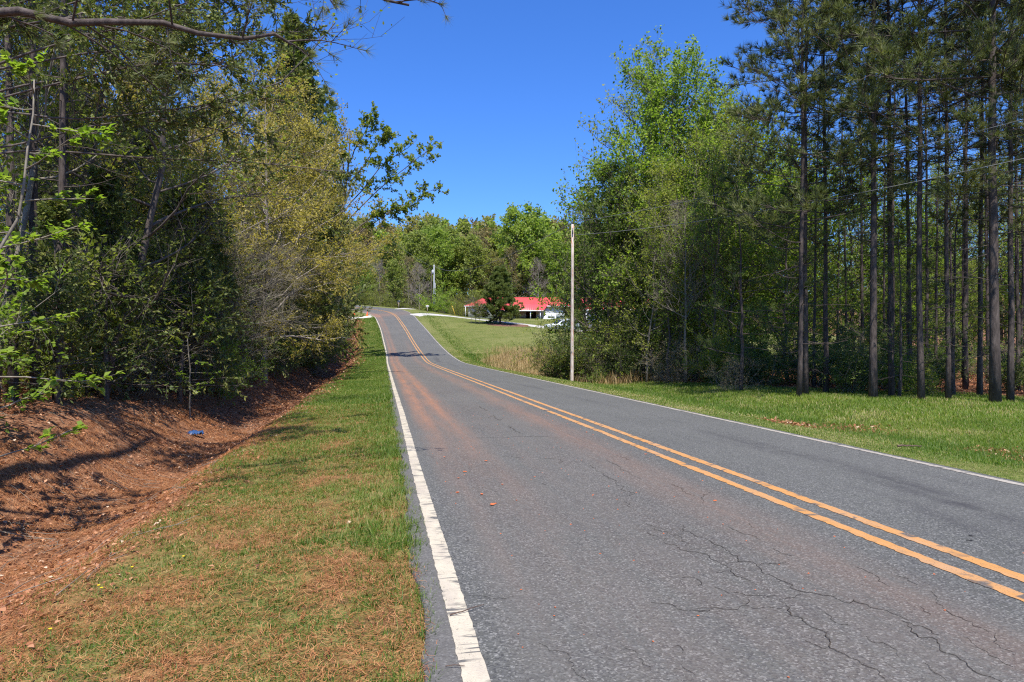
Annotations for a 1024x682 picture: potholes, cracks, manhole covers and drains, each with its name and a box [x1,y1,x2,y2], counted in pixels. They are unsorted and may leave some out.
crack [646,523,1013,682]
